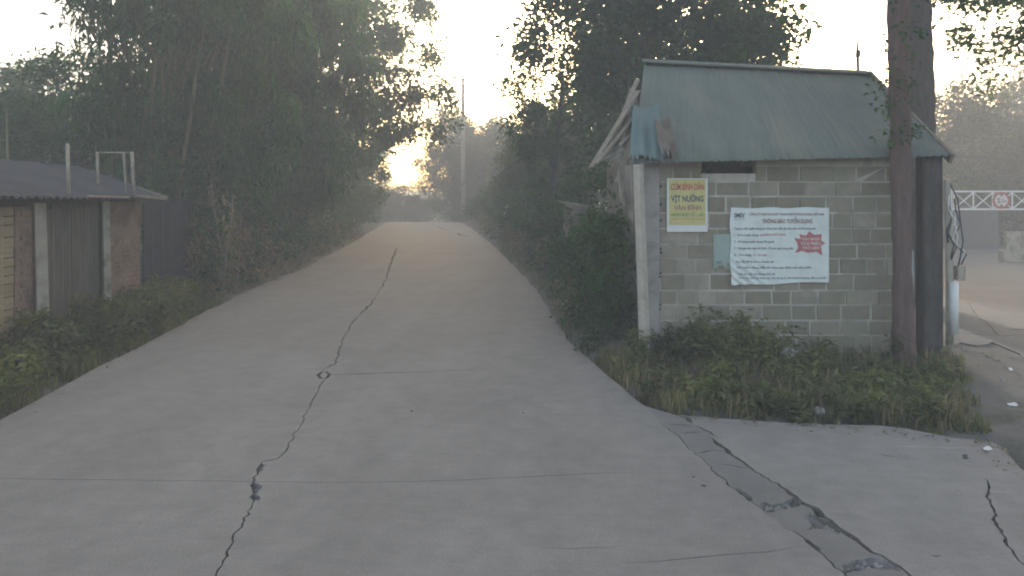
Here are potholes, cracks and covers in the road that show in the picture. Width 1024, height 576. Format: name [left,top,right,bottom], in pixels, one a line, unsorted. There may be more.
crack [670,415,911,576]
crack [985,478,1024,565]
crack [215,248,398,576]
